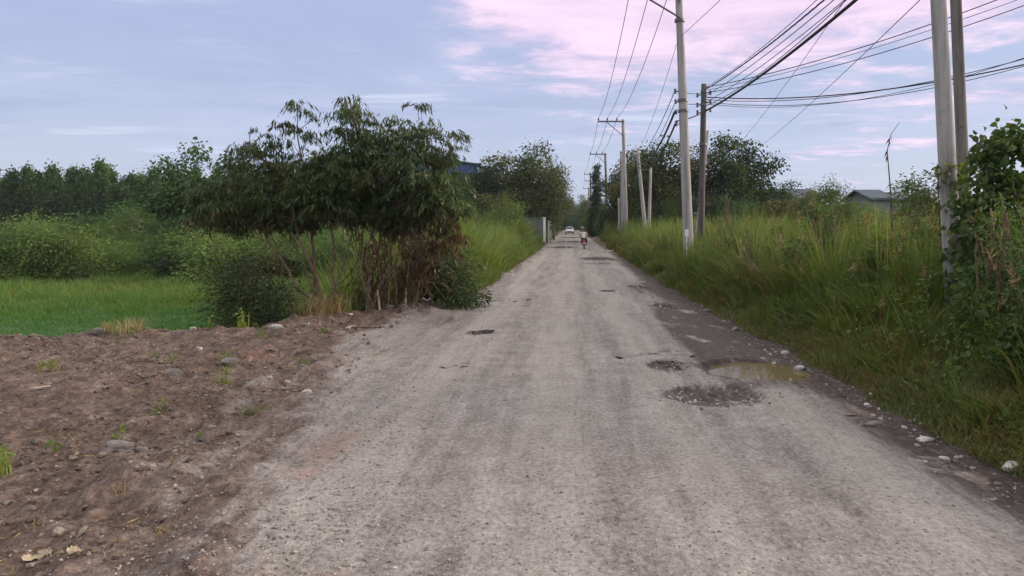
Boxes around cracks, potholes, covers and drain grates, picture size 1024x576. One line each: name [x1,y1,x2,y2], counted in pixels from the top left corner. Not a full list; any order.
pothole [642,360,691,372]
pothole [647,382,784,411]
pothole [678,355,830,385]
crack [618,349,692,359]
